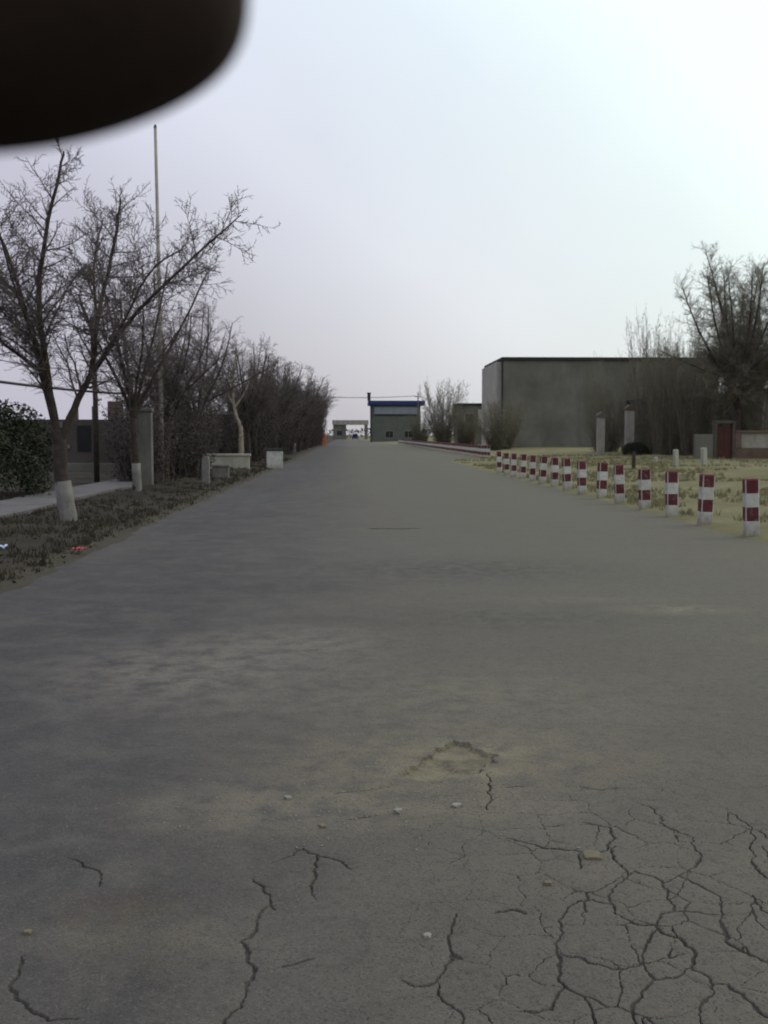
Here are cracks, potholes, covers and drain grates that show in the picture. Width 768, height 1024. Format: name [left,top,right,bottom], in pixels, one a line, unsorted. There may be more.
crack [223,882,276,1024]
crack [404,914,465,1024]
crack [437,788,768,1024]
pothole [400,741,497,783]
crack [8,957,78,1022]
crack [75,860,103,886]
crack [284,848,349,900]
